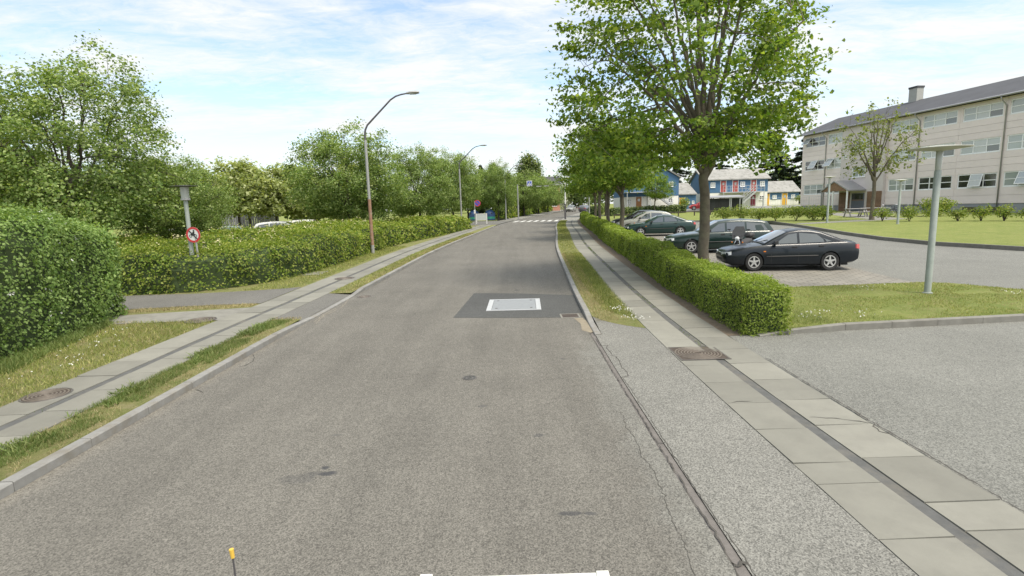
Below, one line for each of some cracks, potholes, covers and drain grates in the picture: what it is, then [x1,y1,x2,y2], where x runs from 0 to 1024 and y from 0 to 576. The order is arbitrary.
utility cover [486,298,541,311]
manhole cover [667,346,731,361]
manhole cover [18,388,74,403]
crack [590,334,756,576]
